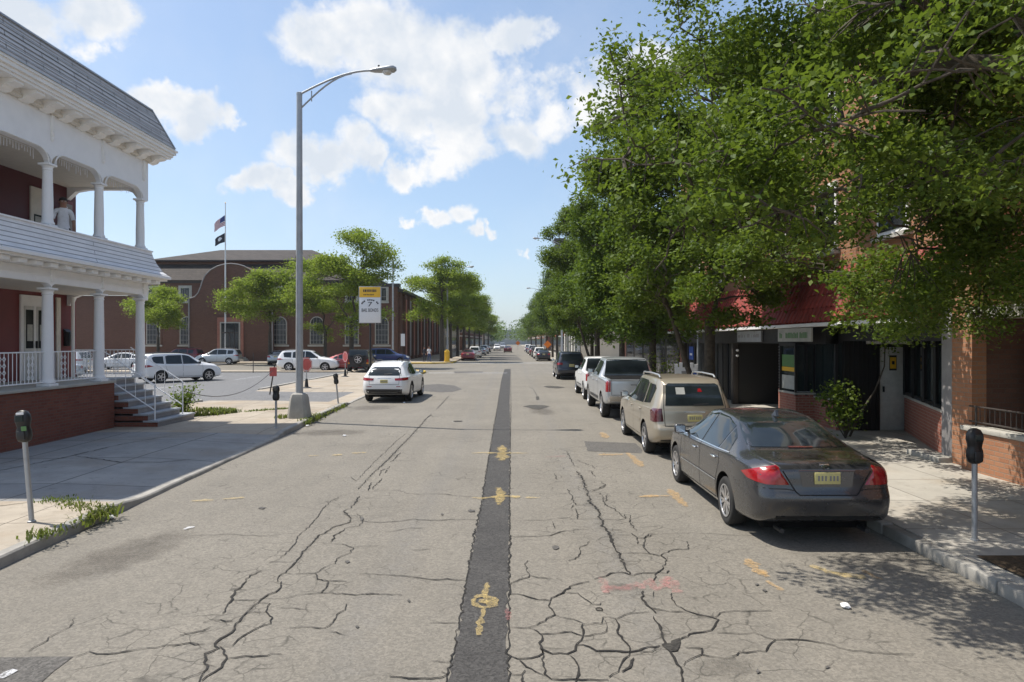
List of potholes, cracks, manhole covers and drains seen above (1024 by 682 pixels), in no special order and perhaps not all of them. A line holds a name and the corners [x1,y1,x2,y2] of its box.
crack [78,375,902,682]
